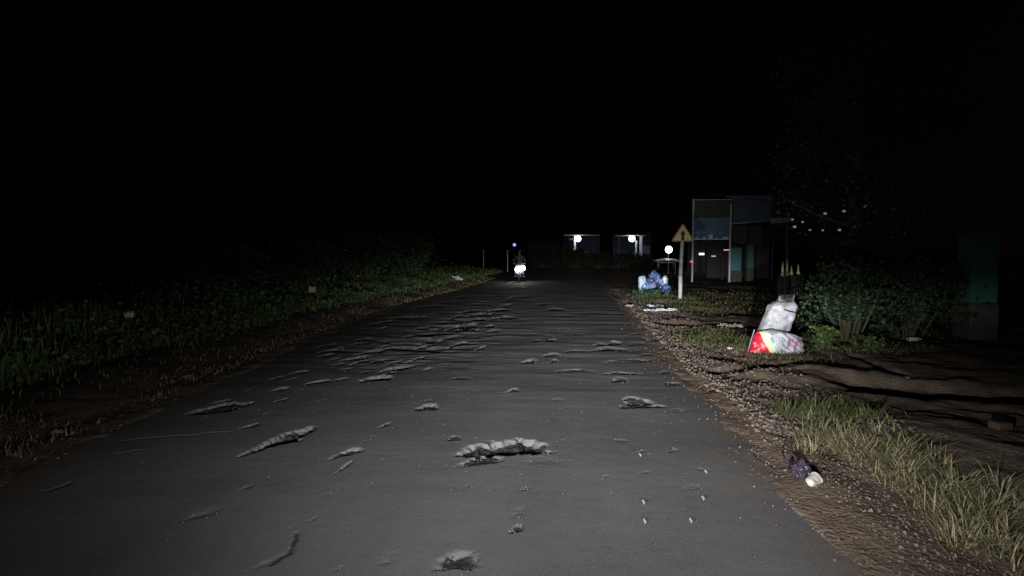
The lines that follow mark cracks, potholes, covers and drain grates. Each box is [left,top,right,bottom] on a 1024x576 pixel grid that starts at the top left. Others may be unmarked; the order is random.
pothole [355,374,396,383]
pothole [377,364,416,374]
pothole [433,549,481,571]
pothole [445,321,483,331]
crack [113,431,237,455]
pothole [234,425,317,458]
pothole [453,438,559,459]
pothole [182,401,256,415]
pothole [351,346,406,356]
pothole [413,403,441,411]
pothole [335,354,375,362]
